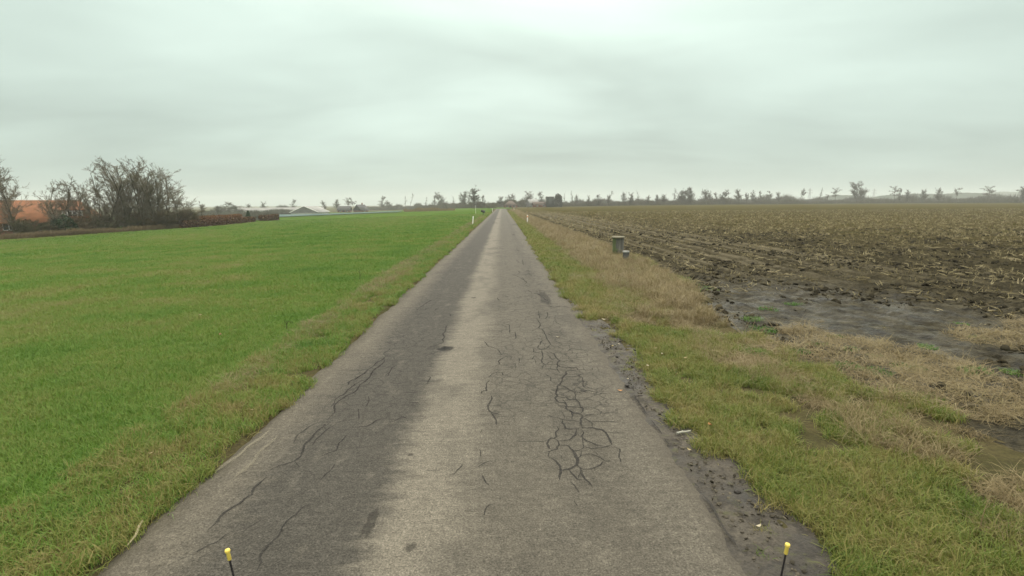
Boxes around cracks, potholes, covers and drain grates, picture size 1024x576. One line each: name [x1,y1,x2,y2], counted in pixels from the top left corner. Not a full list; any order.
crack [199,357,421,570]
crack [449,260,622,505]
